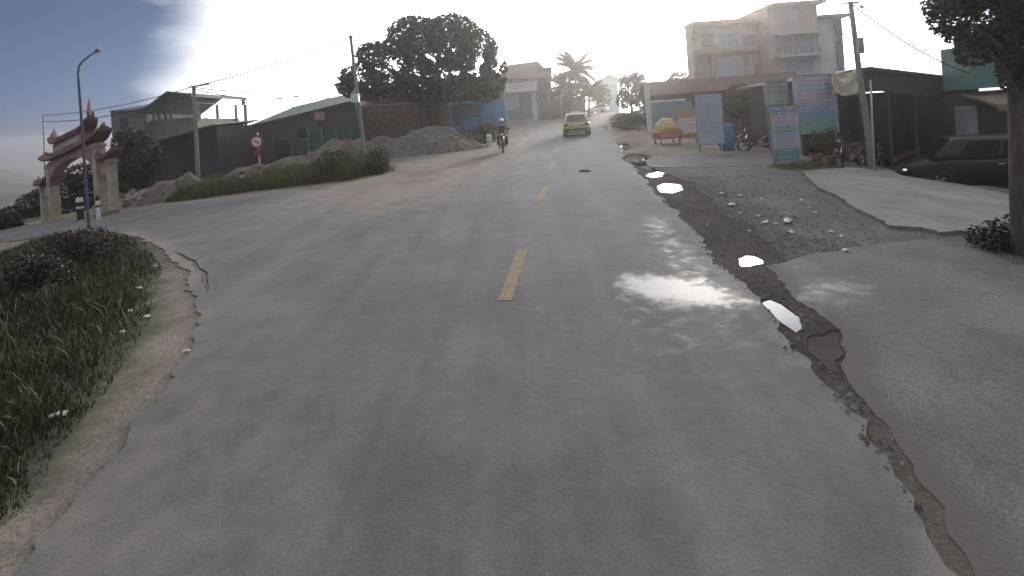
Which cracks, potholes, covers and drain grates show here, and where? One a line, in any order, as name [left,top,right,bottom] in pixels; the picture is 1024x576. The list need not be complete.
pothole [621,154,651,164]
crack [177,253,209,290]
pothole [805,329,846,373]
pothole [736,254,765,268]
pothole [760,297,804,334]
pothole [656,182,684,194]
